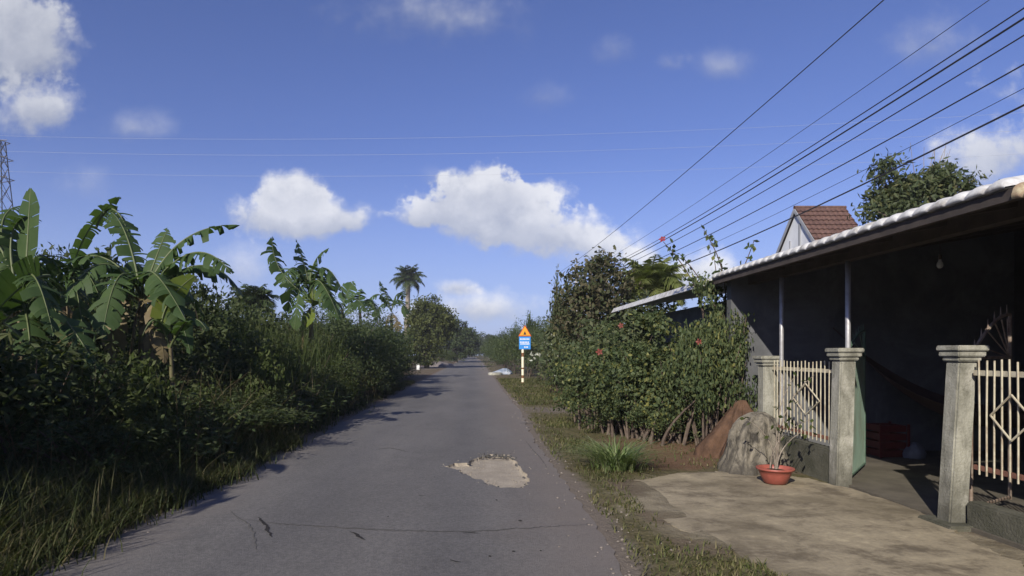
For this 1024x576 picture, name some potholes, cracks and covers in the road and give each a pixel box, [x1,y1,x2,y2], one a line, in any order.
pothole [442,450,531,488]
crack [231,511,591,550]
